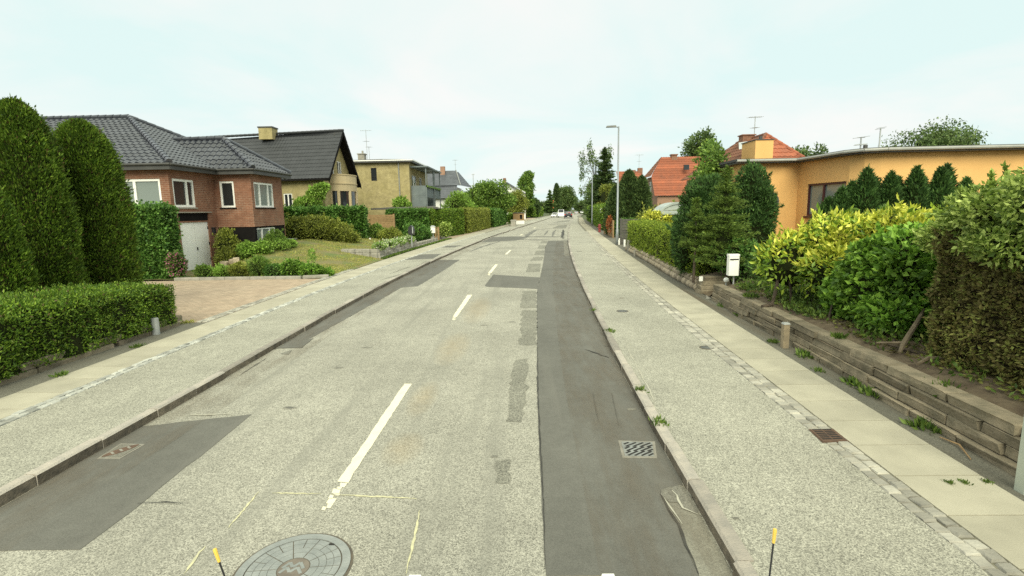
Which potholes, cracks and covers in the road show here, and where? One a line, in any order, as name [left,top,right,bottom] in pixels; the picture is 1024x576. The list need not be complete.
drain grate [809,429,849,443]
crack [661,490,699,574]
drain grate [618,440,657,458]
drain grate [97,443,145,459]
manhole cover [232,533,353,576]
